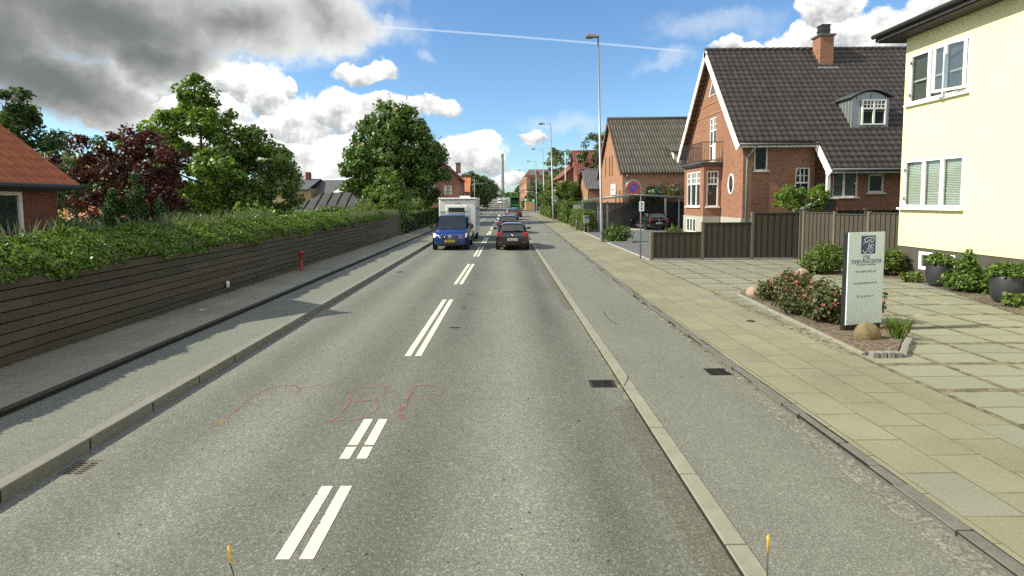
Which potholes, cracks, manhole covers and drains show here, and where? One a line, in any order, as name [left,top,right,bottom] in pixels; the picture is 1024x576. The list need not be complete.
drain grate [57,461,103,475]
drain grate [588,380,617,388]
